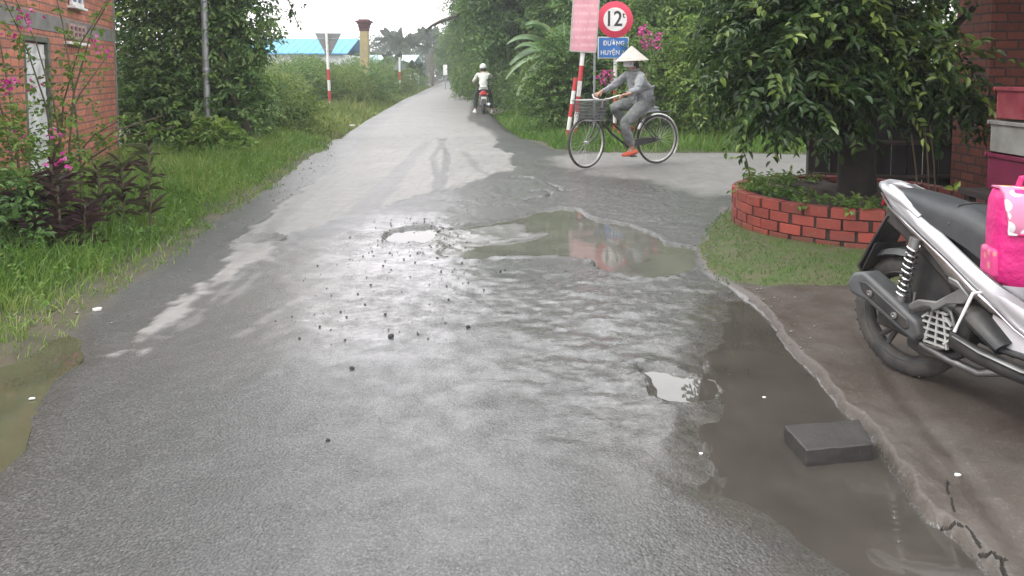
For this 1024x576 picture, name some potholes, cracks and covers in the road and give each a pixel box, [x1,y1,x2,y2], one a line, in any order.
crack [932,480,1009,576]
pothole [589,217,699,278]
pothole [380,224,443,244]
pothole [435,206,598,260]
pothole [631,360,725,404]
